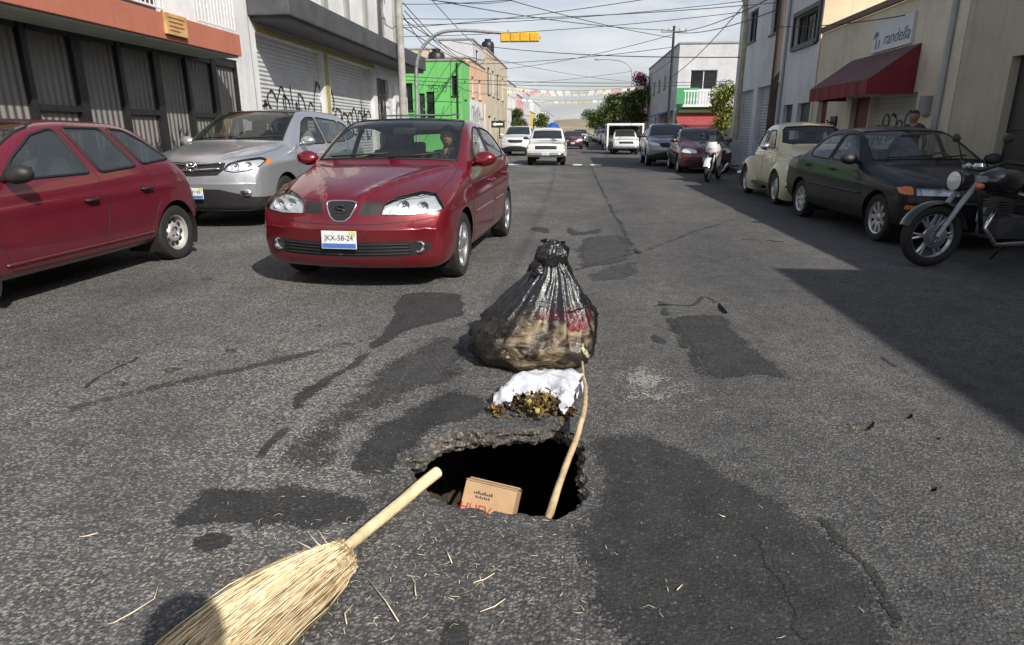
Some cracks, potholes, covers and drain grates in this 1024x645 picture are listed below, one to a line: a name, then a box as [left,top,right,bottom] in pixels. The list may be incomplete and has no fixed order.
pothole [403,424,590,520]
crack [751,517,904,643]
